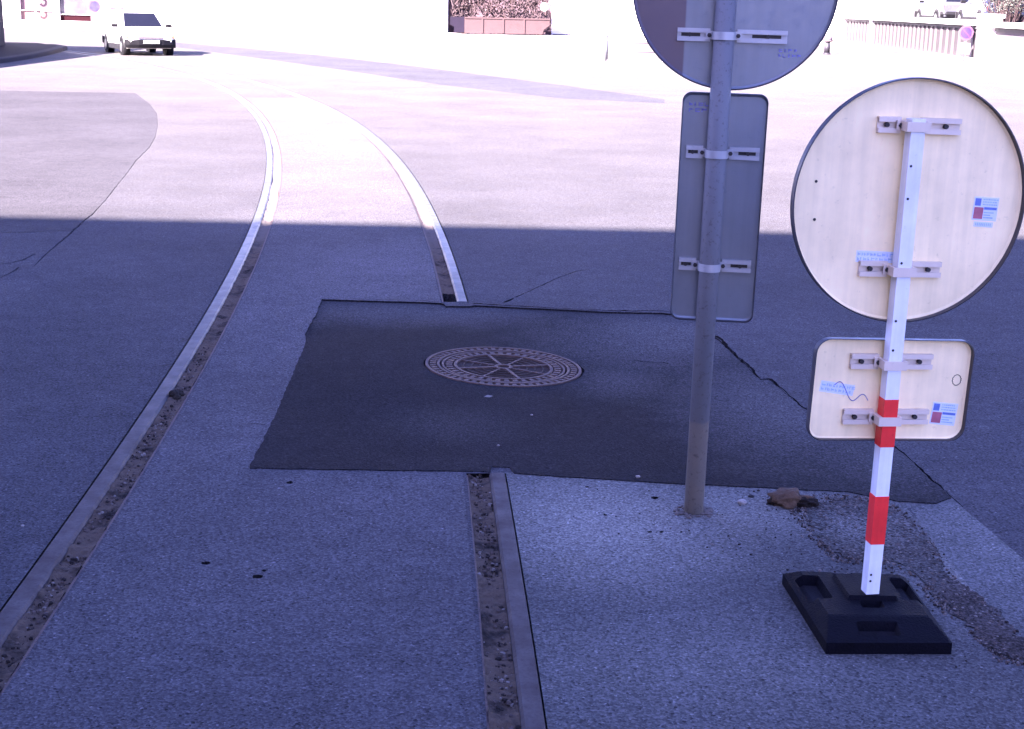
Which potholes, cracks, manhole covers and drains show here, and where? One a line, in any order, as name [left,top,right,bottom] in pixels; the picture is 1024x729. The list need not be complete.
crack [715,336,963,507]
crack [345,269,669,312]
manhole cover [424,347,583,388]
